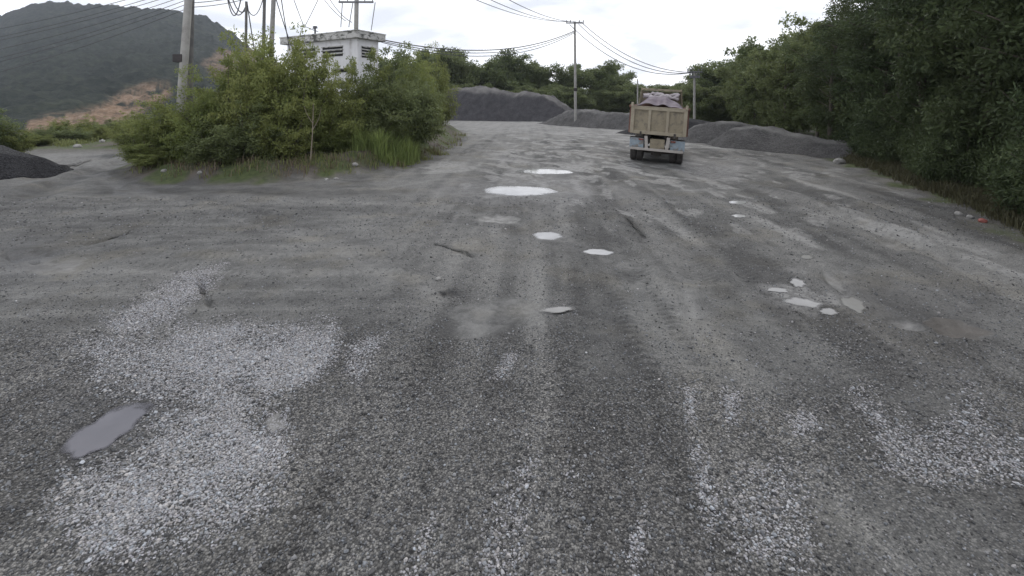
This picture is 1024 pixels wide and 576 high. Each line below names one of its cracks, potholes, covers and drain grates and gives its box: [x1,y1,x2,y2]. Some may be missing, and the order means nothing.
crack [434,243,473,258]
pothole [482,185,563,196]
pothole [778,296,826,309]
pothole [818,307,839,316]
pothole [539,307,577,315]
pothole [788,277,808,288]
pothole [53,399,159,463]
pothole [531,231,564,240]
